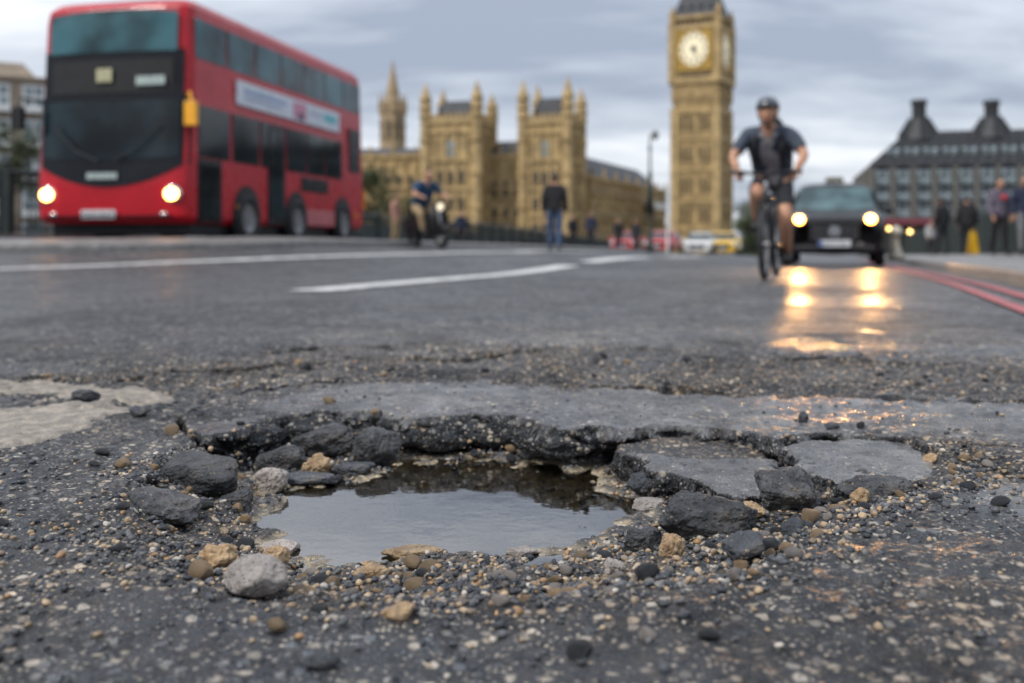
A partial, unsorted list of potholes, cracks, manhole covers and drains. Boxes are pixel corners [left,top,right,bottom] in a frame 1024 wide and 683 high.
pothole [113,410,975,614]
